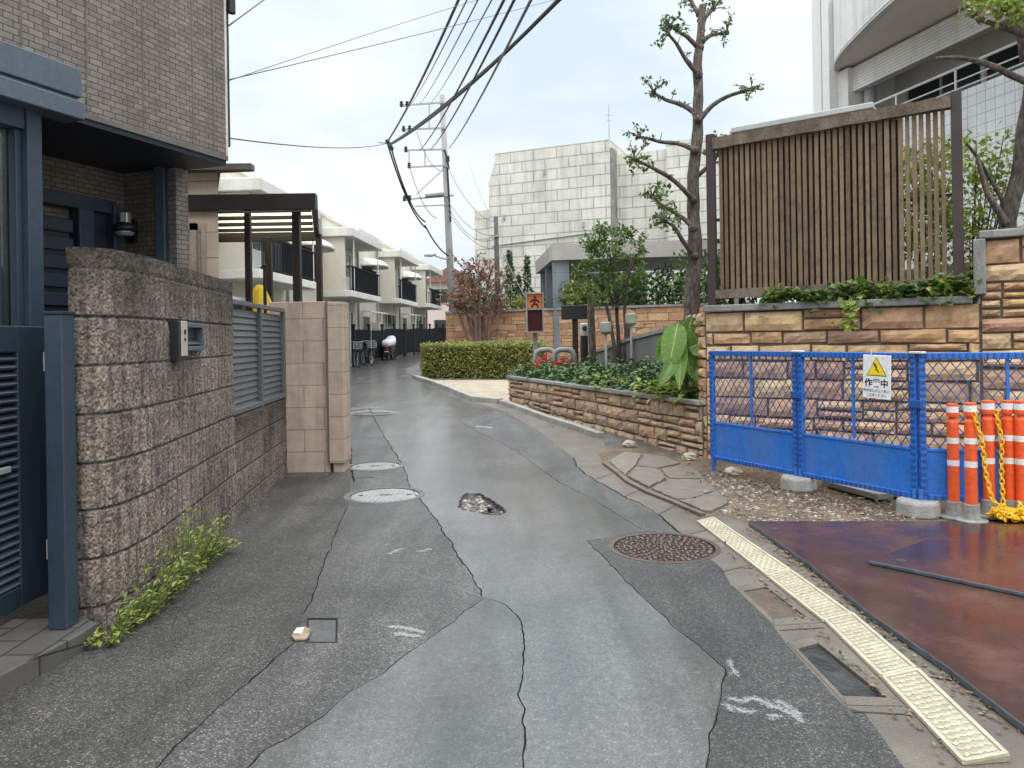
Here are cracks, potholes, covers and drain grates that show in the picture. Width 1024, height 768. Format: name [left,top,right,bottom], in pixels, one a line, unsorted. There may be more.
manhole cover [344,487,425,504]
manhole cover [348,461,406,473]
pothole [457,493,506,516]
crack [156,409,527,768]
crack [460,421,681,534]
manhole cover [608,532,721,564]
utility cover [307,618,338,643]
